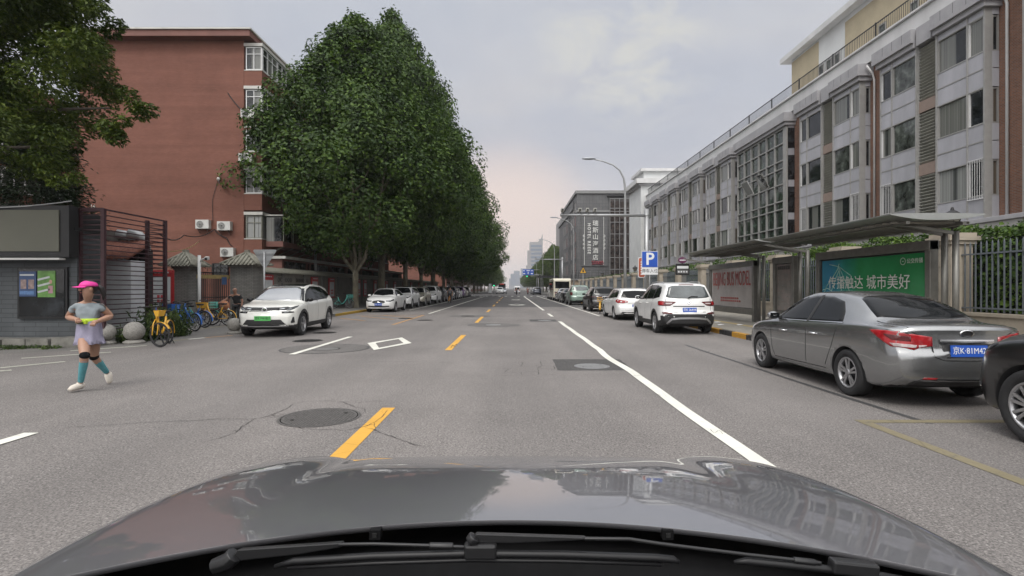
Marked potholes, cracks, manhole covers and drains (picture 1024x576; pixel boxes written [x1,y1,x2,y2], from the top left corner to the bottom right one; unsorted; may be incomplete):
crack [65,401,424,447]
manhole cover [277,408,361,427]
